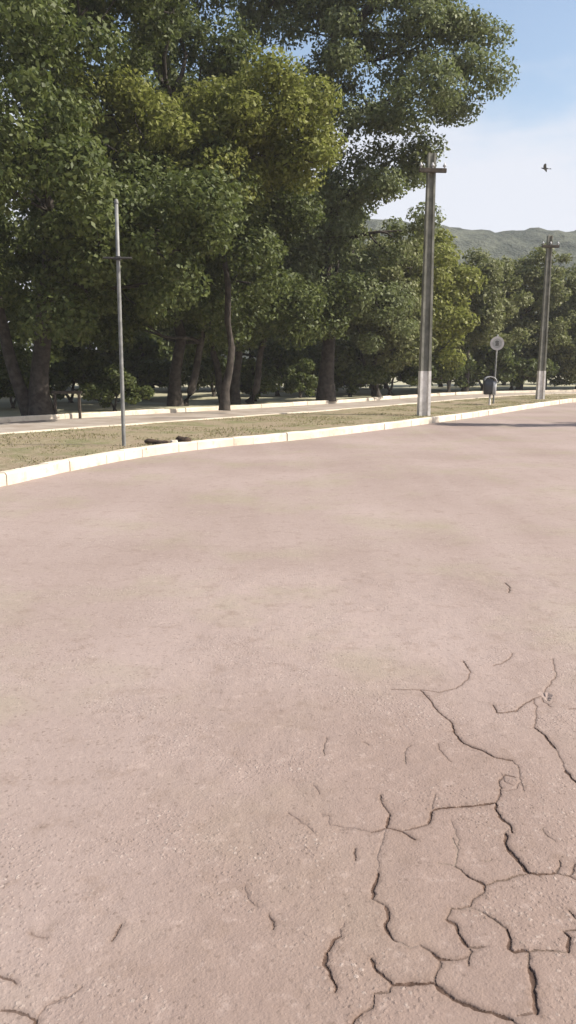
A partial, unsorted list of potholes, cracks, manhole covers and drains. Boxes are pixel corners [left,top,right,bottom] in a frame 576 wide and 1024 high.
crack [0,975,82,1024]
crack [288,654,576,1024]
crack [244,885,274,930]
